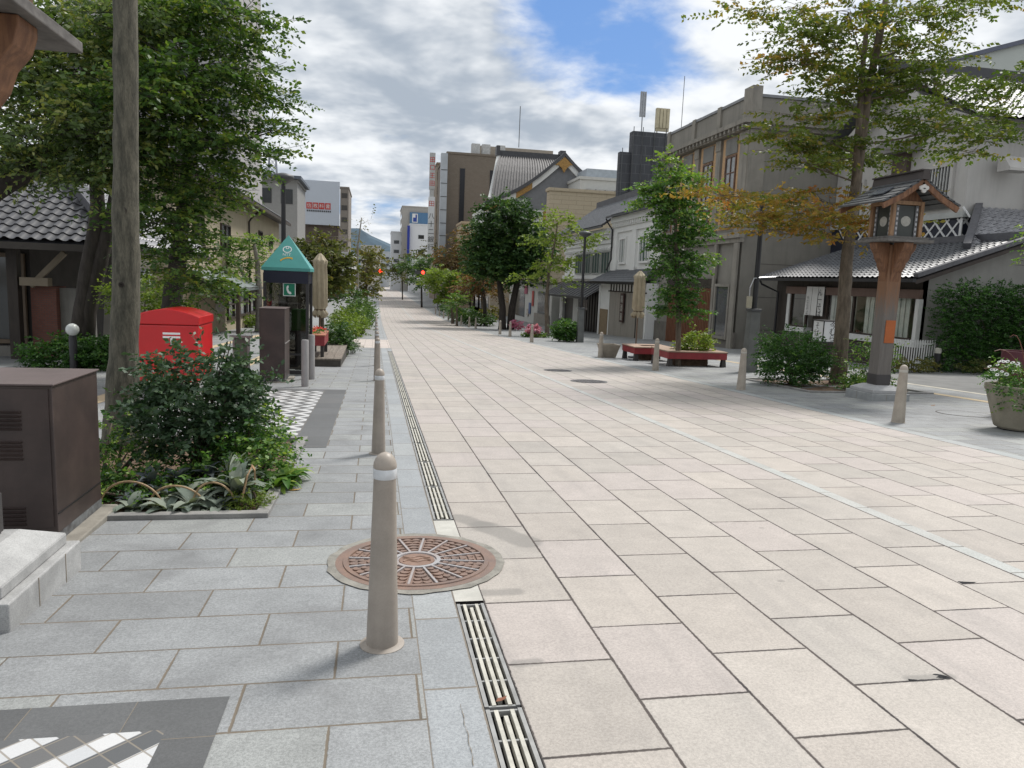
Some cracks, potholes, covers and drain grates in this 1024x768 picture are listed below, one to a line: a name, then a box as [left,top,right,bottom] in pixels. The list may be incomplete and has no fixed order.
drain grate [425,486,453,521]
drain grate [413,443,432,462]
drain grate [457,603,521,710]
drain grate [406,417,420,429]
drain grate [418,462,441,488]
drain grate [409,428,425,443]
drain grate [485,707,544,768]
manhole cover [327,533,505,594]
